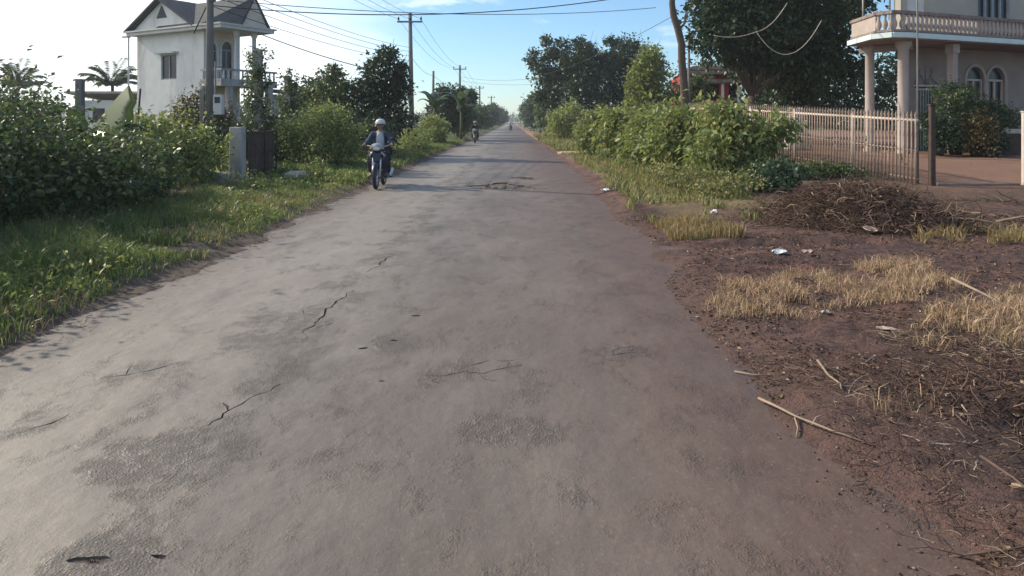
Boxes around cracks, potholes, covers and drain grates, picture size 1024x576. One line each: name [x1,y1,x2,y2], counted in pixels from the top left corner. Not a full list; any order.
crack [423,359,521,384]
pothole [468,182,537,191]
crack [302,290,354,339]
crack [207,384,280,426]
